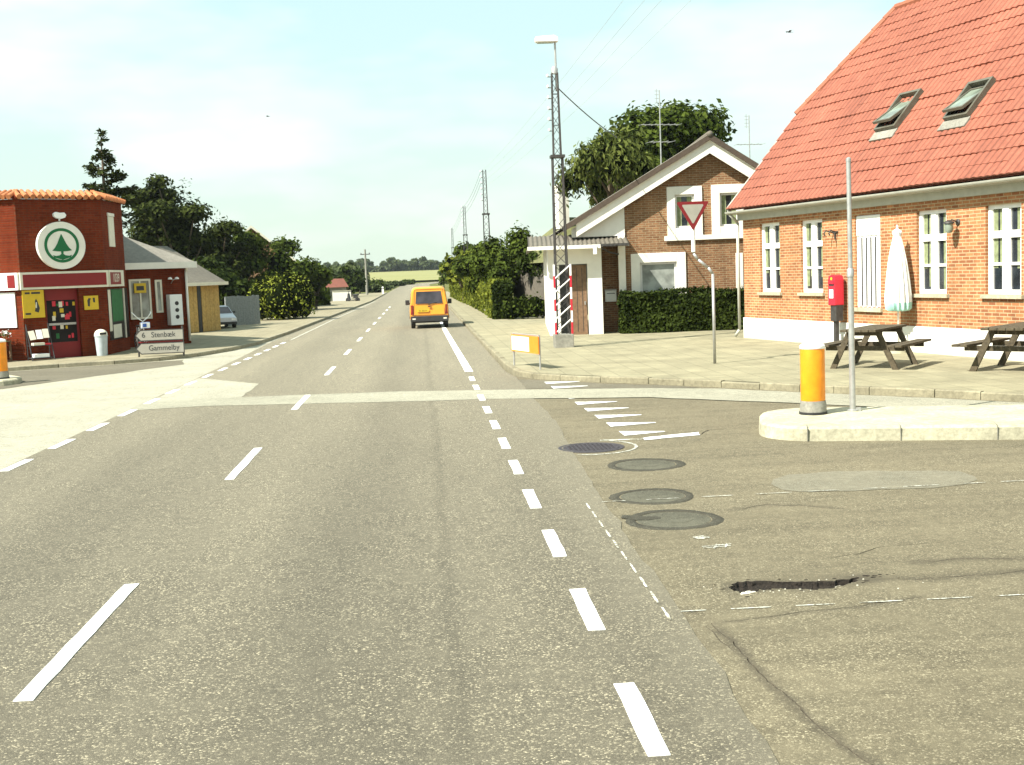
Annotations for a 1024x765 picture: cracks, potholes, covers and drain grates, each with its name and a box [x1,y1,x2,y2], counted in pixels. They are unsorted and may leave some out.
manhole cover [607,458,687,472]
crack [833,542,1024,580]
manhole cover [625,509,724,530]
manhole cover [609,488,694,505]
pothole [681,573,924,597]
crack [708,597,918,765]
